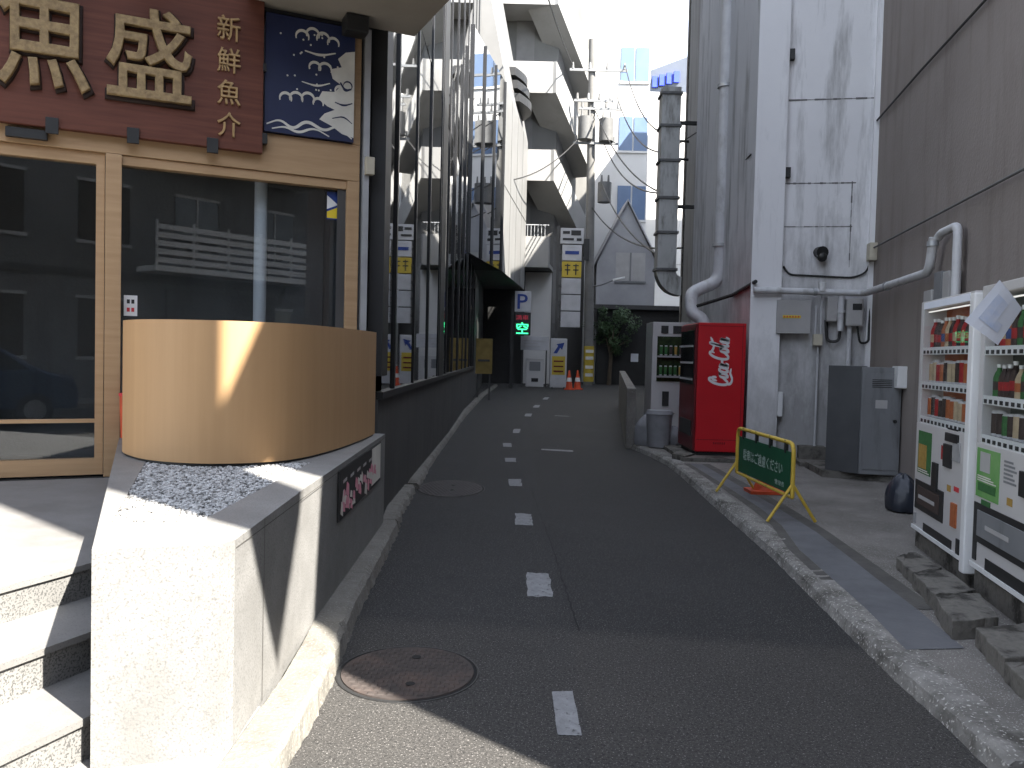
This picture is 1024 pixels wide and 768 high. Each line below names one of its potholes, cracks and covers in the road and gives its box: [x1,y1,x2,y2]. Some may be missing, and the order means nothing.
manhole cover [415,480,485,498]
manhole cover [335,646,479,703]
